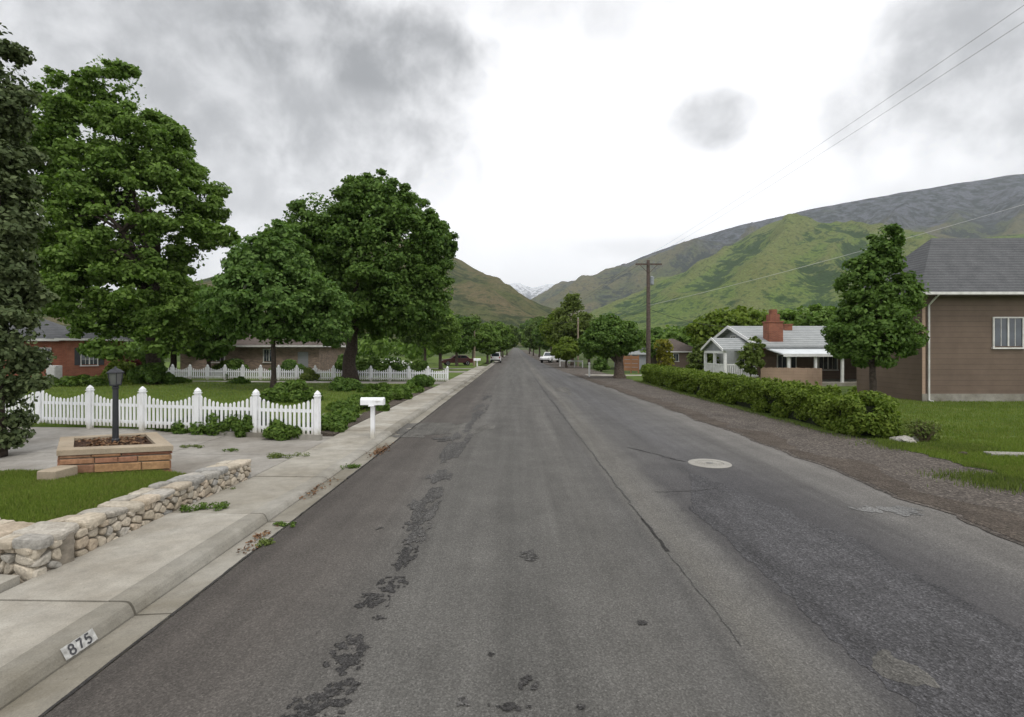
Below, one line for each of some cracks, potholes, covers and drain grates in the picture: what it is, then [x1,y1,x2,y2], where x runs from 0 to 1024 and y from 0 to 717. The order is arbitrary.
pothole [321,677,361,699]
pothole [518,675,533,689]
pothole [329,645,369,676]
pothole [402,510,433,545]
pothole [410,487,443,524]
manhole cover [688,459,732,468]
pothole [439,442,464,463]
pothole [346,634,365,647]
pothole [353,593,386,608]
pothole [519,549,538,561]
pothole [495,702,522,710]
pothole [378,576,406,593]
